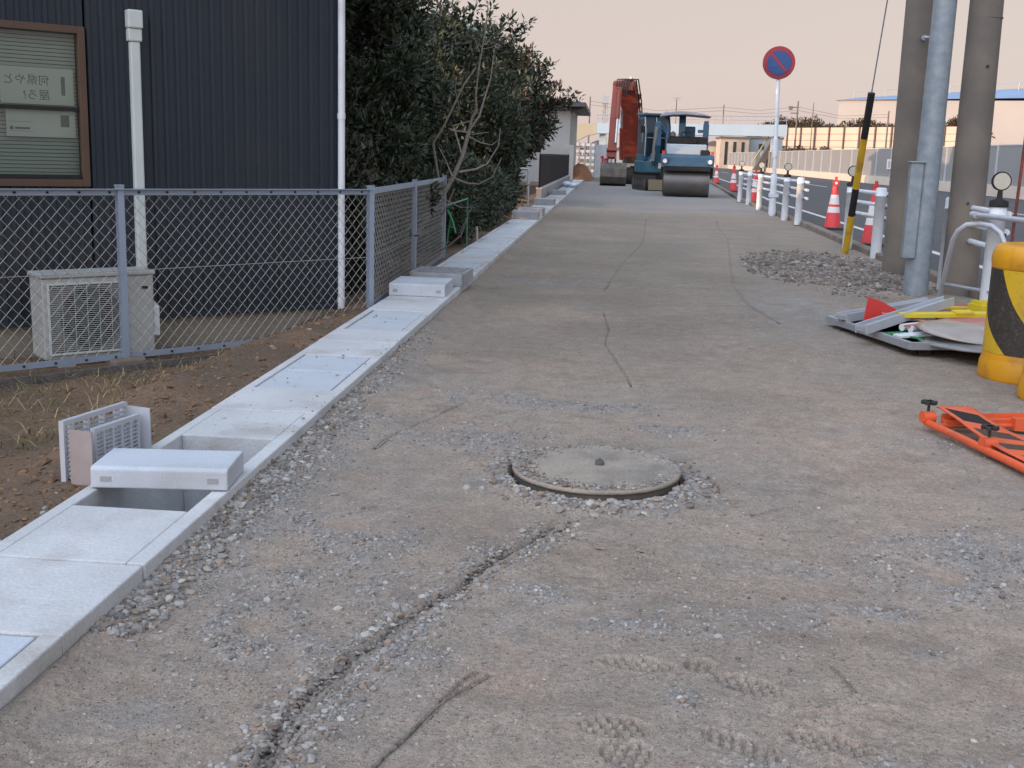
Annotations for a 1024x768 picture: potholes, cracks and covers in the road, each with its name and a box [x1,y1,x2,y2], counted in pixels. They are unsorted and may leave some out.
crack [601,209,779,324]
crack [603,313,631,386]
manhole cover [512,445,681,501]
crack [246,521,653,768]
crack [374,397,534,449]
